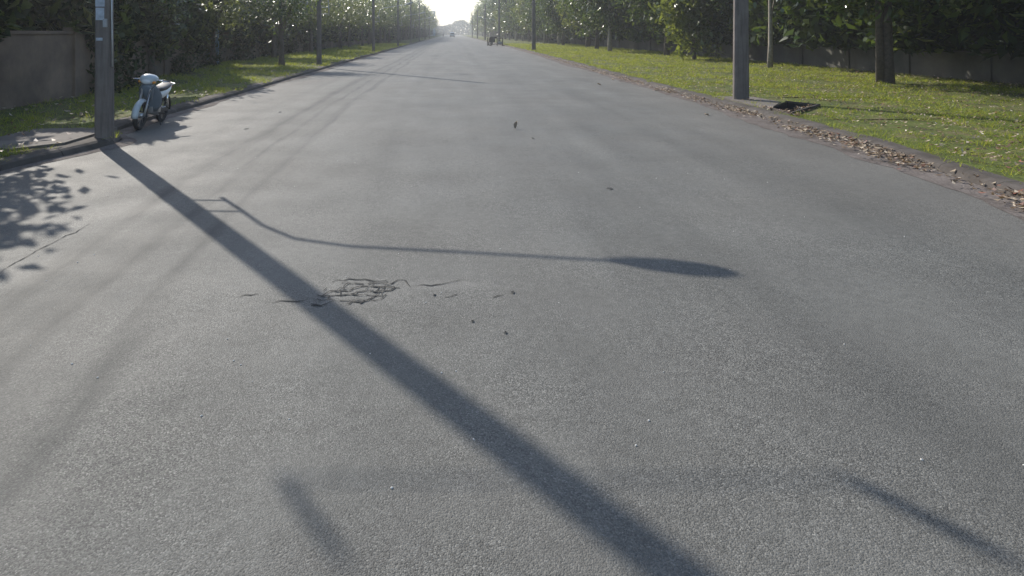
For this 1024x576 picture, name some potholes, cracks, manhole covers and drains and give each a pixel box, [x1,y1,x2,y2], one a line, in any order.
crack [239,278,458,306]
drain grate [770,101,820,115]
